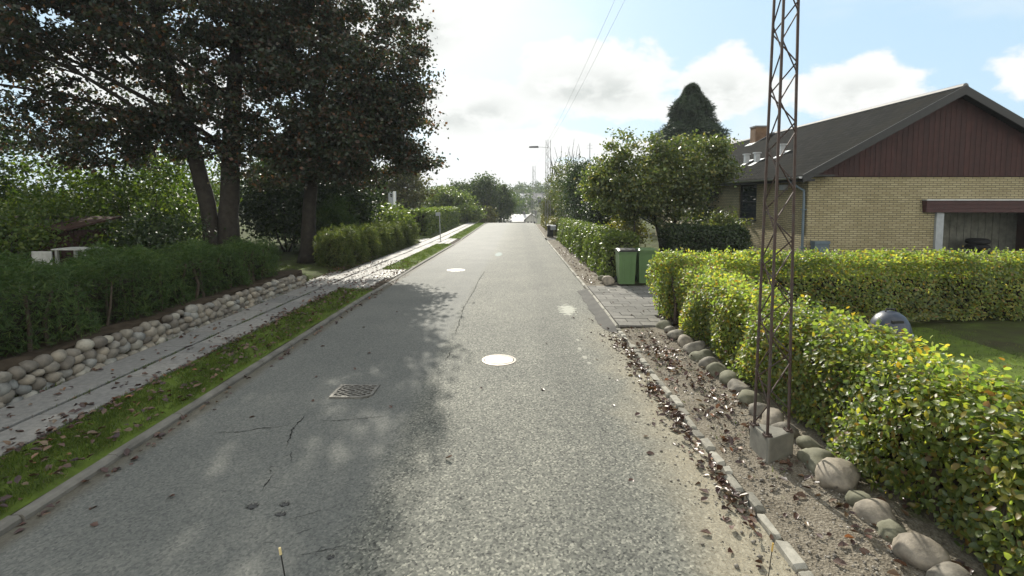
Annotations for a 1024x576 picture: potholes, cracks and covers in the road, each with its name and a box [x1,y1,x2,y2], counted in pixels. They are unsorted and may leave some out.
manhole cover [482,354,516,366]
drain grate [329,384,380,399]
crack [215,415,305,488]
